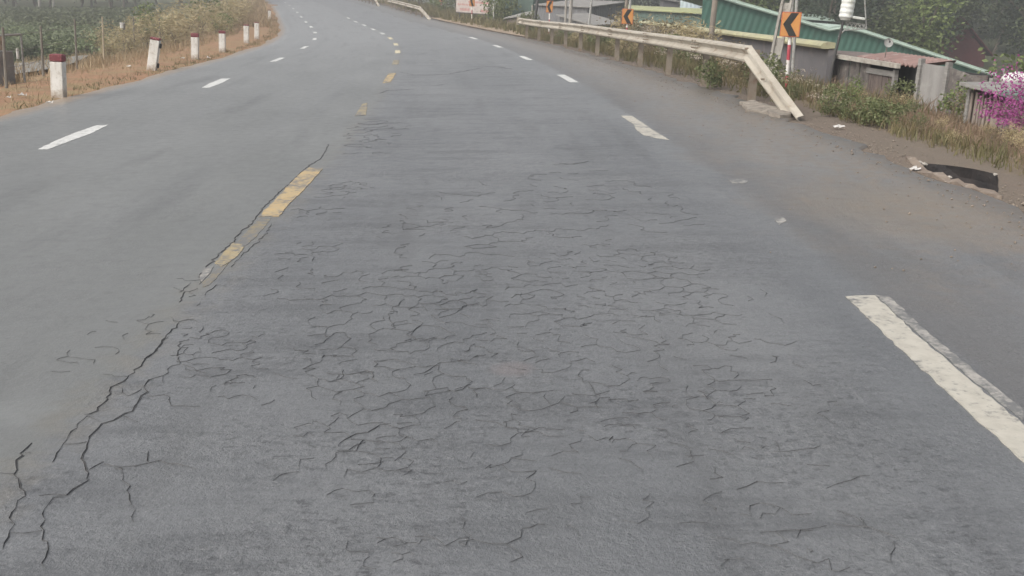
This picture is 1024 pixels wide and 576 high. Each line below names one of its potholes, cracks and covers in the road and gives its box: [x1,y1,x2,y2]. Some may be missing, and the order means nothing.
crack [2,145,835,569]
pothole [905,156,1002,200]
crack [621,441,898,572]
crack [344,119,409,154]
